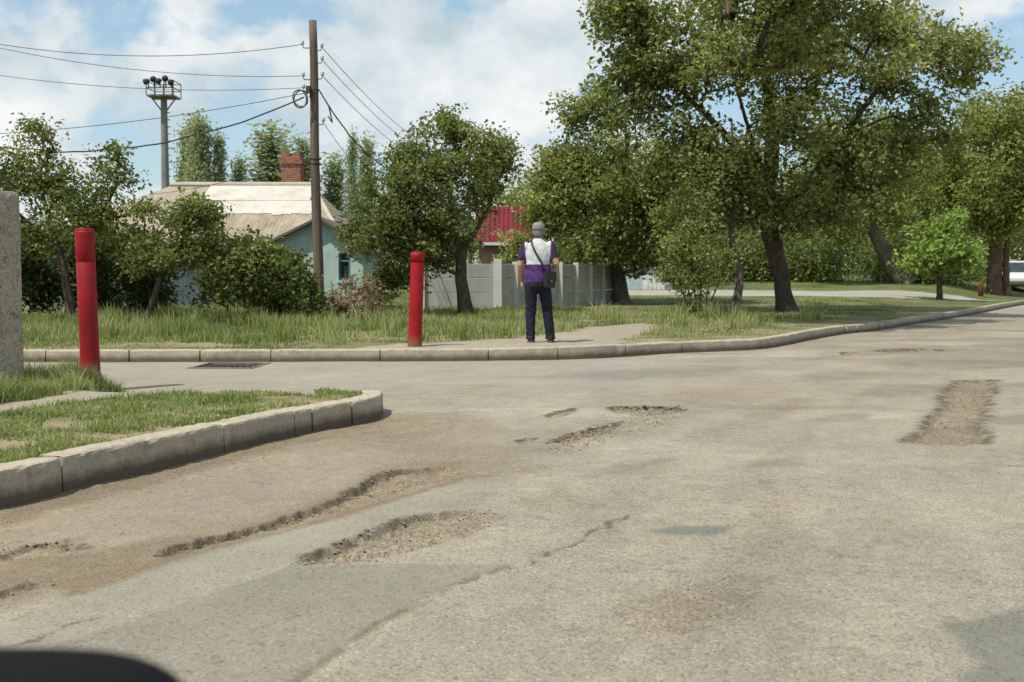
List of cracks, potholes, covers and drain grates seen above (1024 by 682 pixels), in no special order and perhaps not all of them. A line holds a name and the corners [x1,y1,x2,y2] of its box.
pothole [157,466,468,557]
pothole [0,540,95,568]
crack [512,514,633,570]
pothole [543,421,623,443]
pothole [898,379,1002,445]
pothole [302,510,512,564]
pothole [607,405,687,415]
pothole [544,408,578,418]
